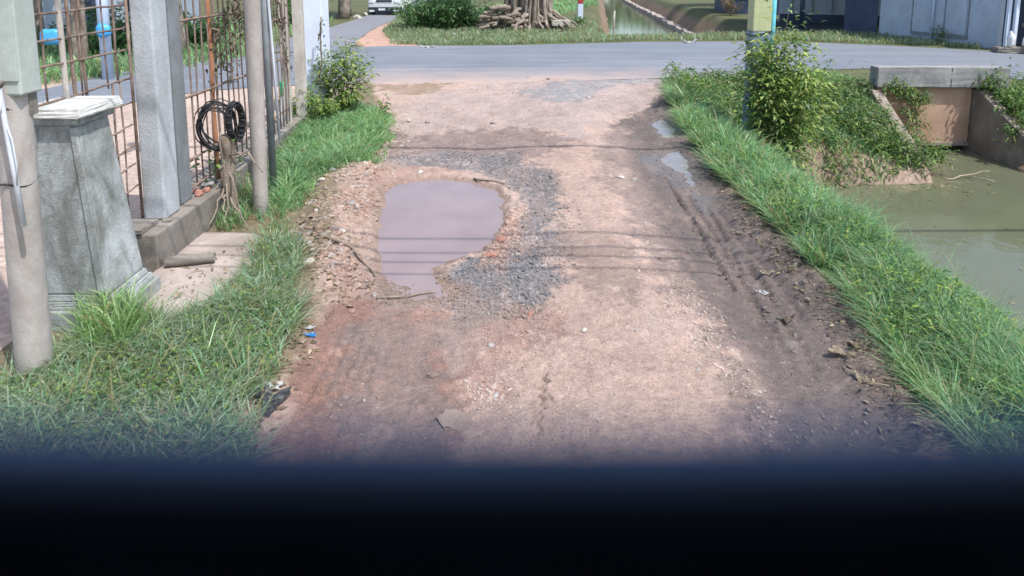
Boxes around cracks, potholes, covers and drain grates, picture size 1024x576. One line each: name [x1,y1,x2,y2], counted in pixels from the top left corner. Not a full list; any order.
crack [528,372,554,431]
pothole [361,173,515,311]
pothole [657,146,707,192]
pothole [648,116,684,140]
